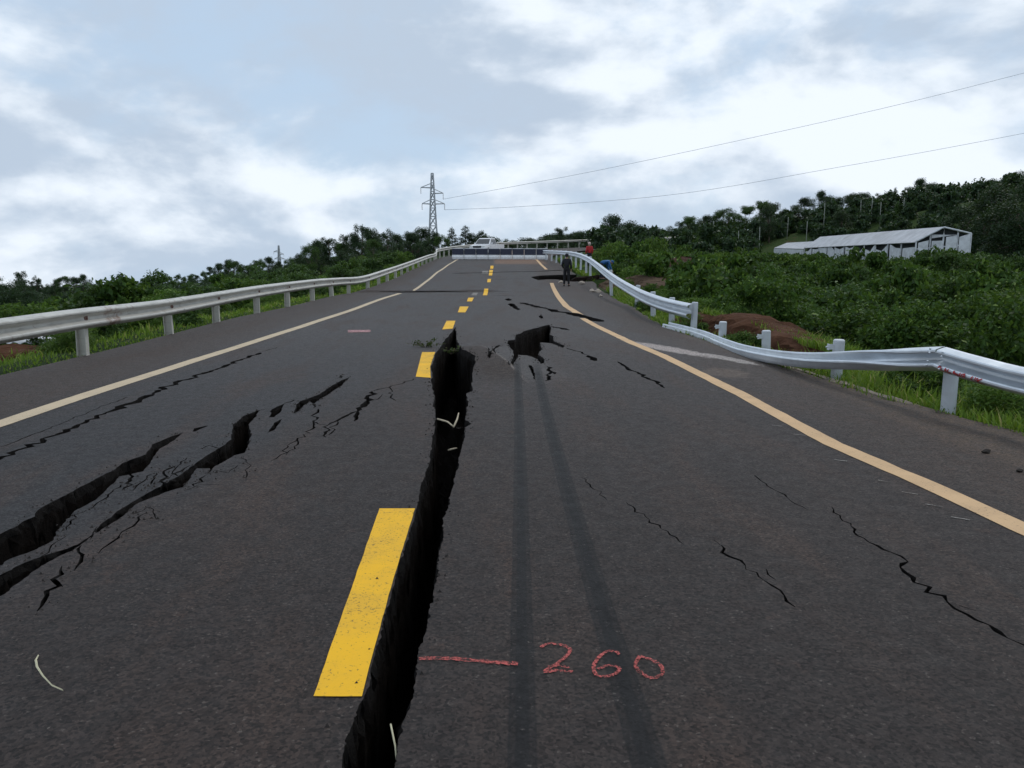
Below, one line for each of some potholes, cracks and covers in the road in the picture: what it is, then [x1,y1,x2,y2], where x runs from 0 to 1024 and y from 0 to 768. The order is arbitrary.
crack [832,507,1024,645]
crack [520,303,604,330]
crack [618,362,665,388]
crack [581,477,683,544]
crack [0,347,472,768]
crack [714,540,795,607]
